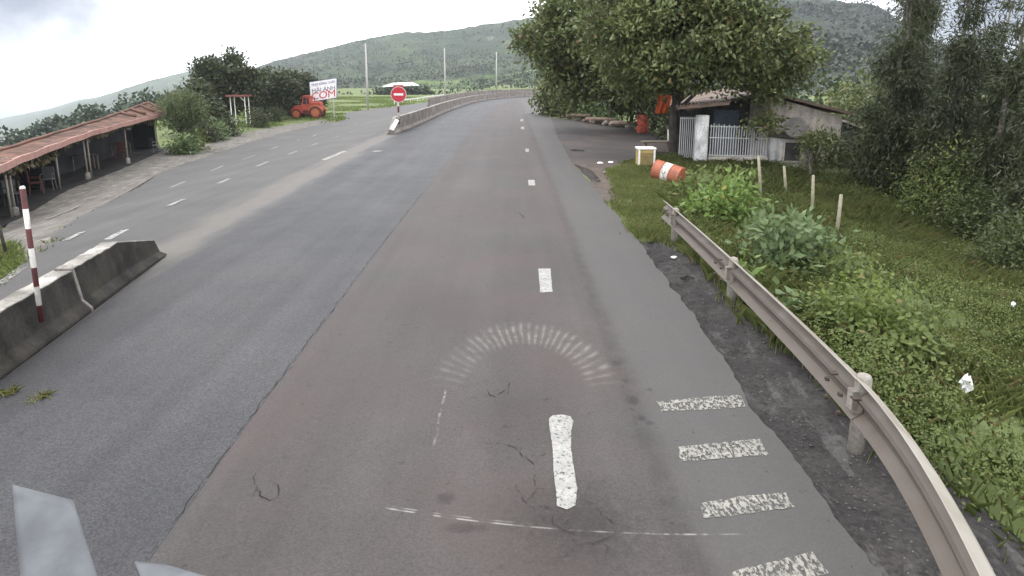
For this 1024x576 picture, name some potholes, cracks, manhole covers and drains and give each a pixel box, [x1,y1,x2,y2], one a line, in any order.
crack [488,426,618,558]
